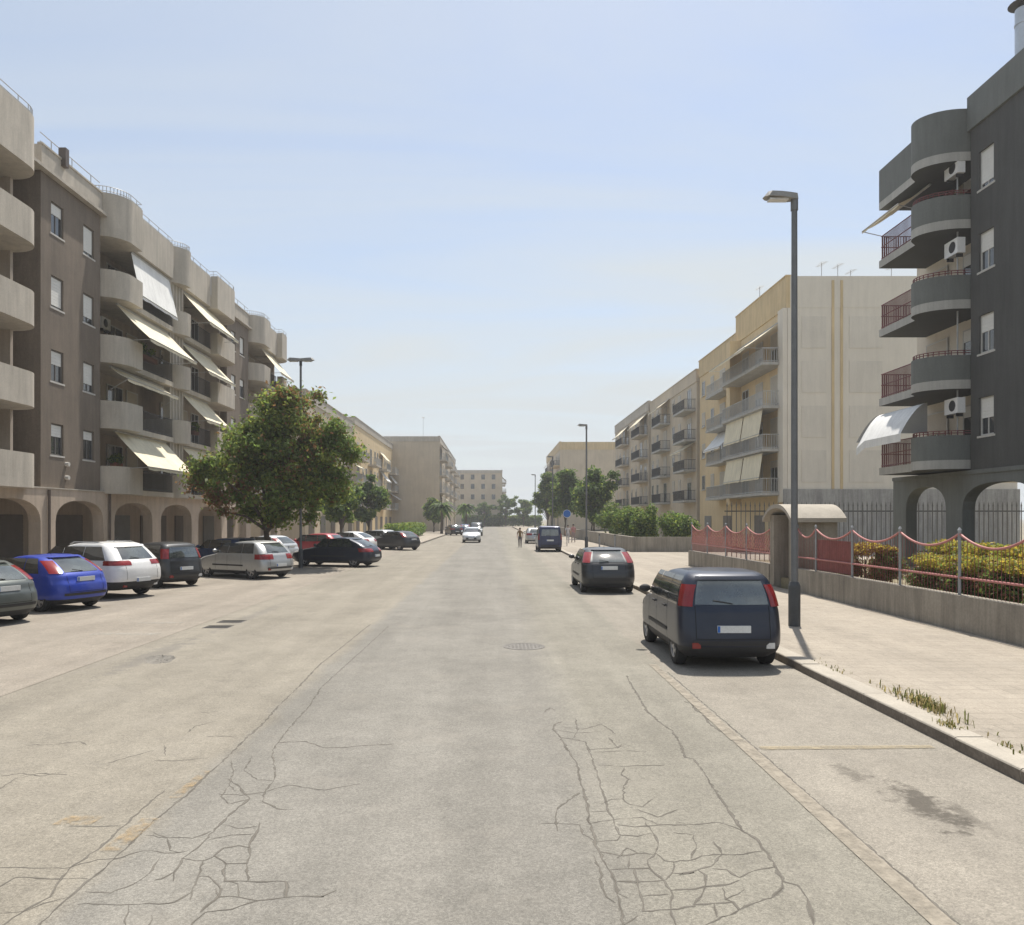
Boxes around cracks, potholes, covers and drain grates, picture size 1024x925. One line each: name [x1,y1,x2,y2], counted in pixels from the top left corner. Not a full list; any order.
crack [545,676,814,925]
